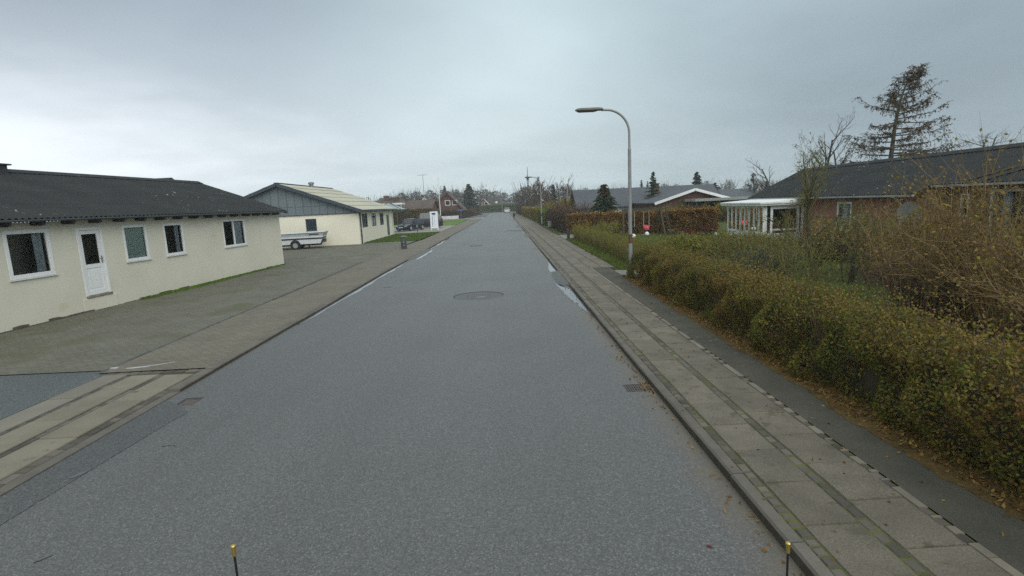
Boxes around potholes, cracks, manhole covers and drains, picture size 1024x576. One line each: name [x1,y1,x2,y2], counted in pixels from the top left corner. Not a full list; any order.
manhole cover [453,291,504,300]
